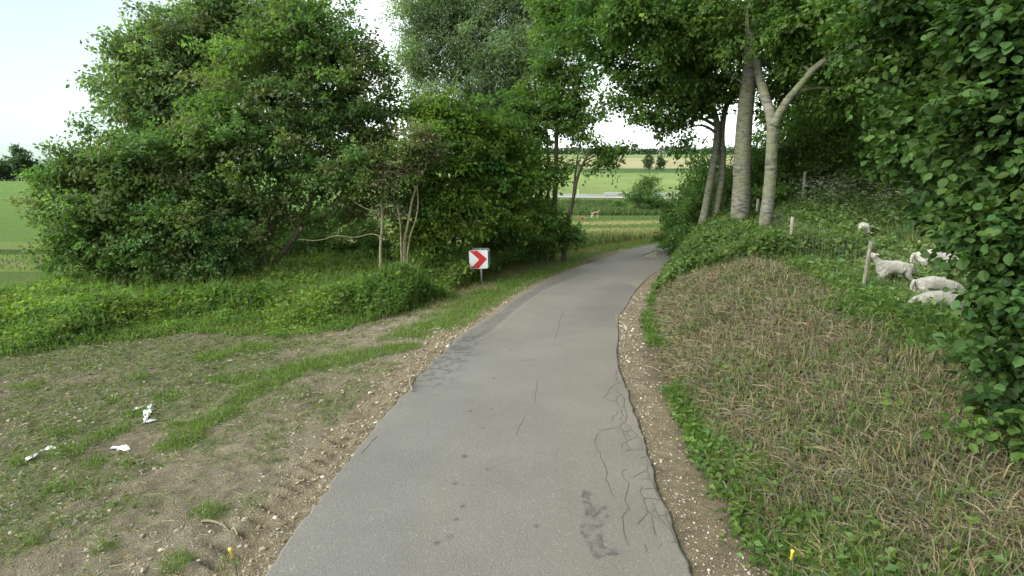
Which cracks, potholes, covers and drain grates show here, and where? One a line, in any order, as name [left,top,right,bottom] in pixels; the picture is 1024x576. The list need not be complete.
crack [595,370,677,551]
